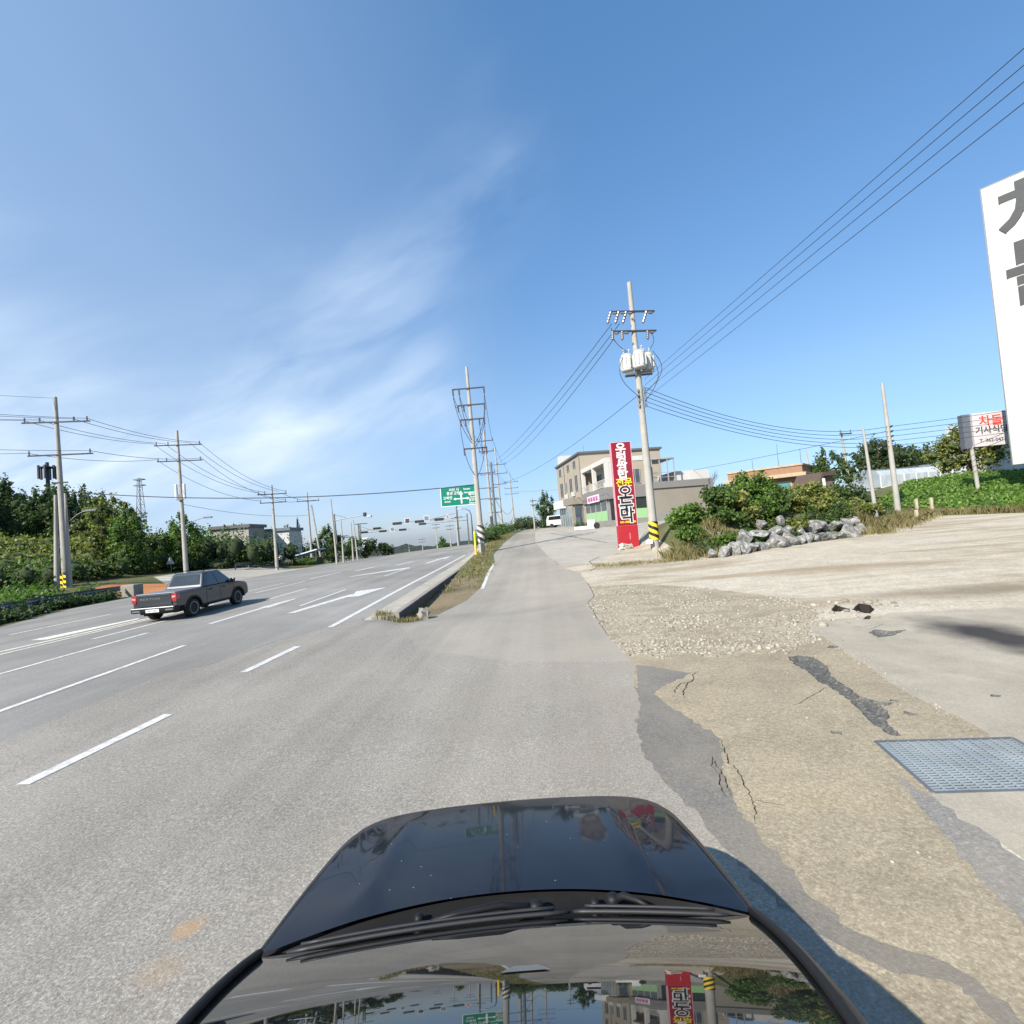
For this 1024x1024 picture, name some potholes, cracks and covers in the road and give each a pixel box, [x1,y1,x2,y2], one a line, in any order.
crack [674,672,697,697]
drain grate [874,737,1024,794]
crack [710,734,785,823]
